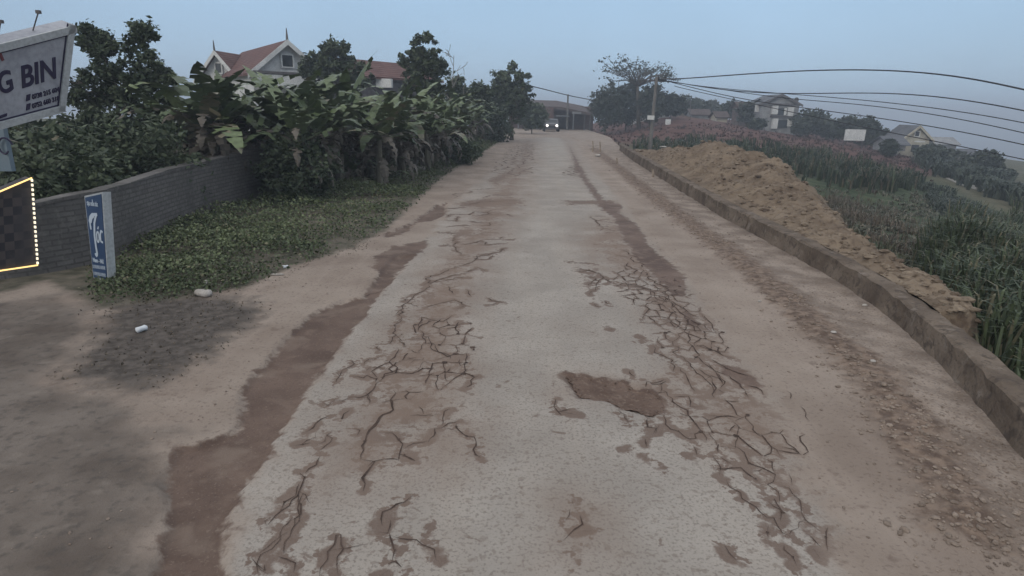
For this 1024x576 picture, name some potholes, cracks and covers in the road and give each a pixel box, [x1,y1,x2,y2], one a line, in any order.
crack [604,255,843,563]
crack [253,458,319,573]
pothole [565,375,664,417]
crack [299,144,536,576]
